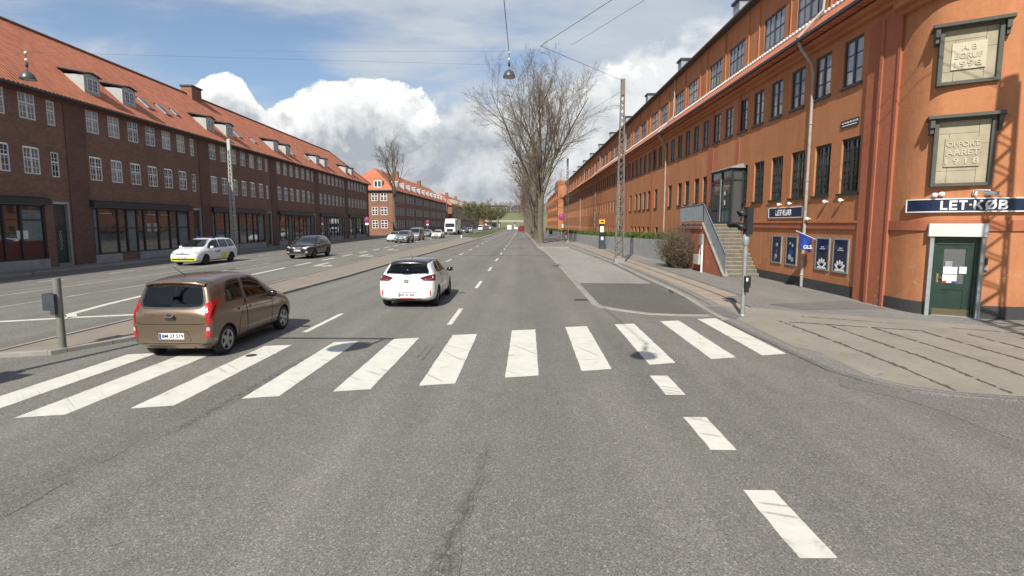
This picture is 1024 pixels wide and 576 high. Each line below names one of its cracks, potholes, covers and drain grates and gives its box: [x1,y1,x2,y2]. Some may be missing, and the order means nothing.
crack [437,445,488,576]
crack [6,480,72,516]
